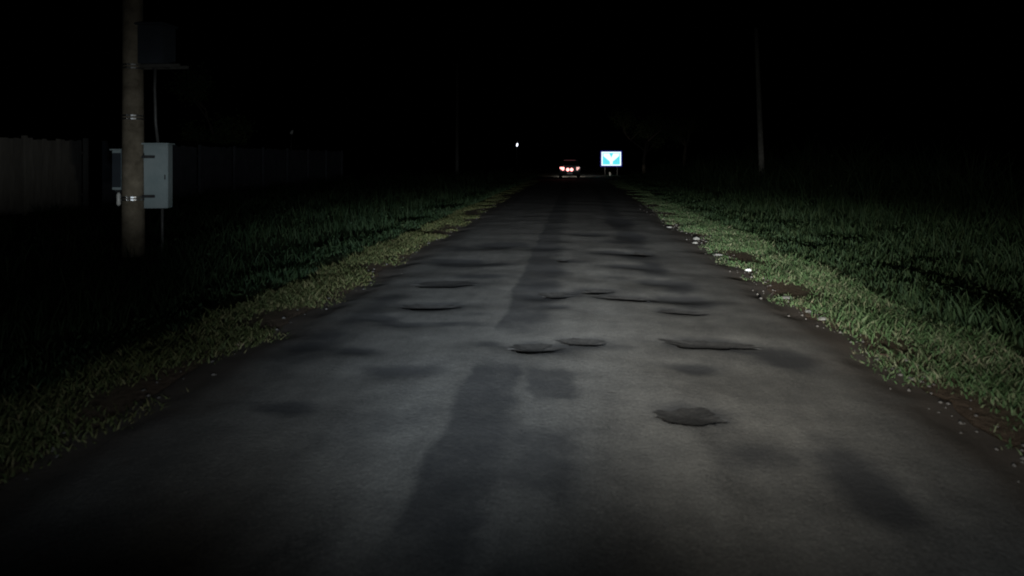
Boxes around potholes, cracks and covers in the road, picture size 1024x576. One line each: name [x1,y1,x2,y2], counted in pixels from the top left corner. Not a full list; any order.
pothole [398,303,468,311]
pothole [652,337,768,350]
pothole [648,406,731,427]
pothole [409,280,482,288]
pothole [505,342,570,354]
pothole [553,337,610,347]
